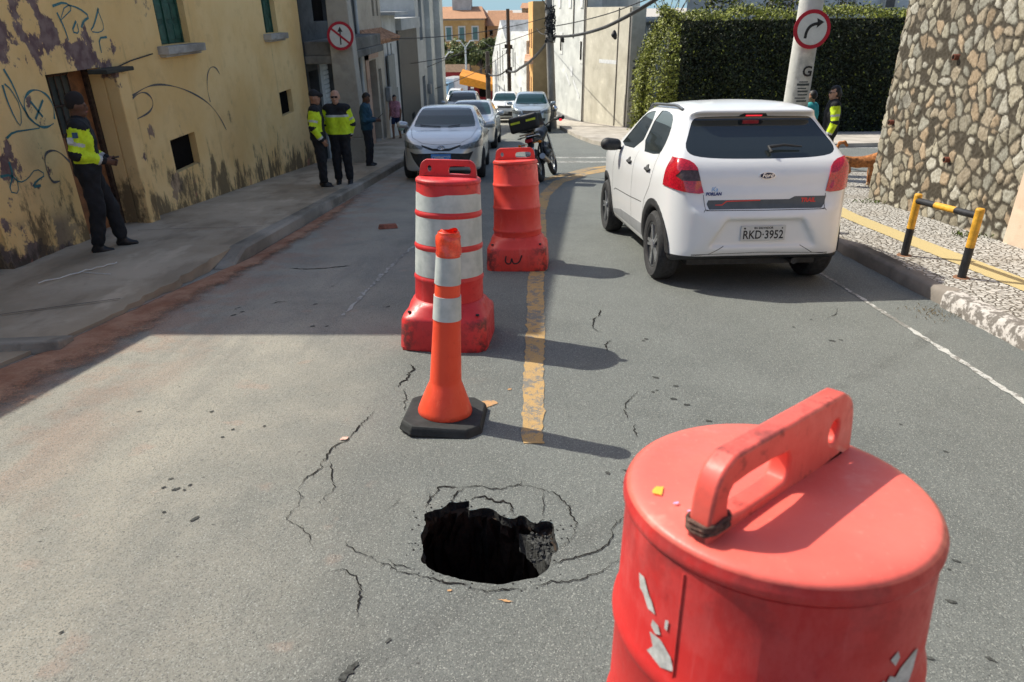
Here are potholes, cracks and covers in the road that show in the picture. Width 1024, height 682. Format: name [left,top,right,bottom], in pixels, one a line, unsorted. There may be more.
pothole [406,496,572,592]
crack [286,411,374,544]
crack [339,480,624,615]
crack [398,364,416,408]
